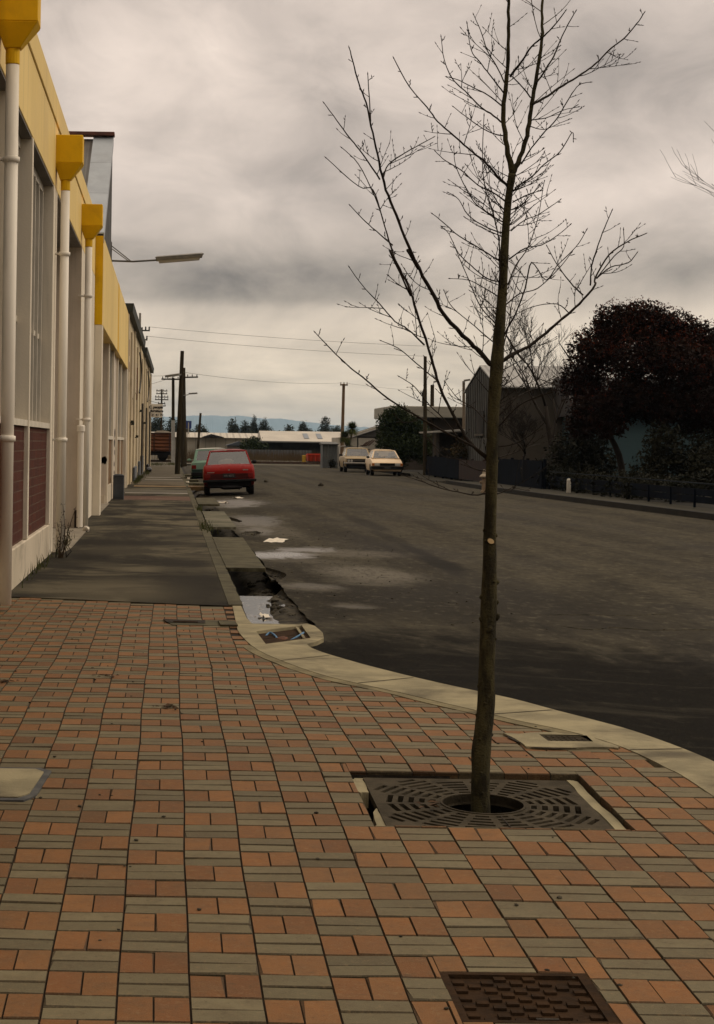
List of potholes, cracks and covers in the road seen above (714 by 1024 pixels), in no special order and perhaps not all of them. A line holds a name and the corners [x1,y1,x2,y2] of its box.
pothole [262,567,286,585]
